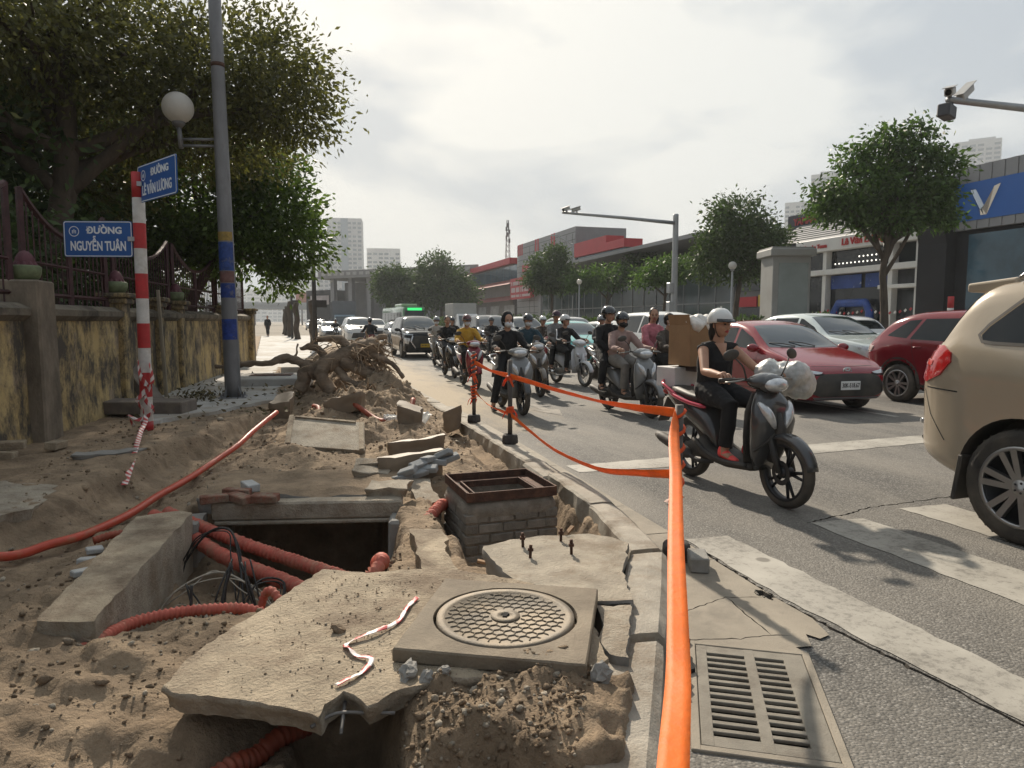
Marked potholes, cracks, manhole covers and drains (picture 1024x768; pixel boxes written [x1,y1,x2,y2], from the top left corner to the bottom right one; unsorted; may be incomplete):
crack [807,496,950,523]
manhole cover [392,578,598,678]
utility cover [444,468,557,563]
drain grate [690,640,854,768]
